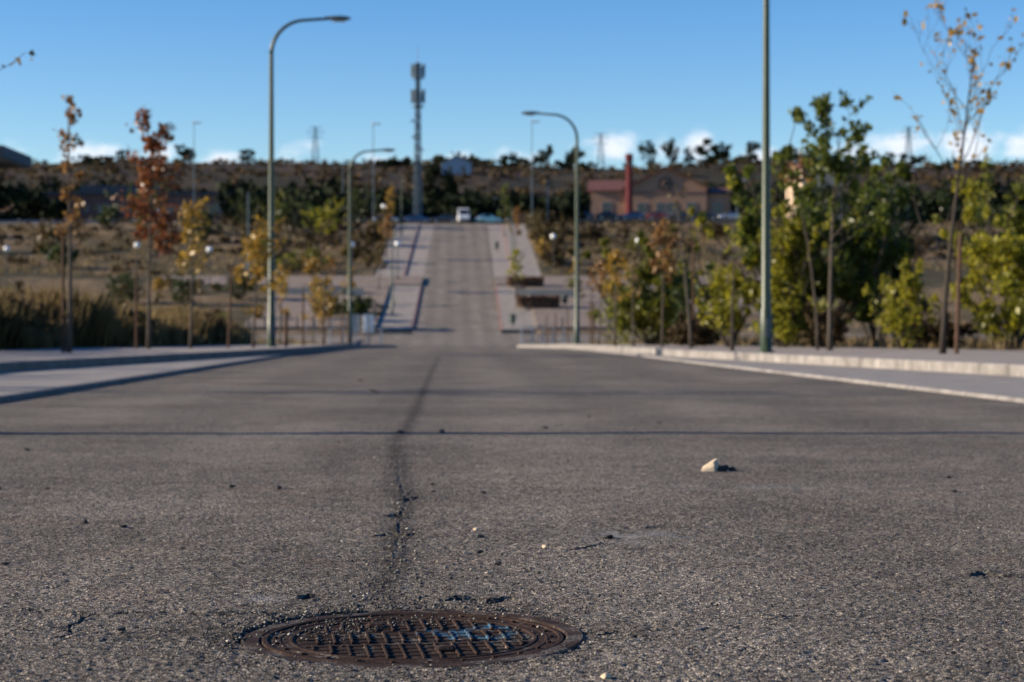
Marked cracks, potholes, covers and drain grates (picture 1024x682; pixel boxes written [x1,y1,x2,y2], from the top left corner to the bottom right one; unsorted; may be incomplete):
crack [548,526,672,550]
crack [392,459,409,559]
manhole cover [241,610,585,669]
